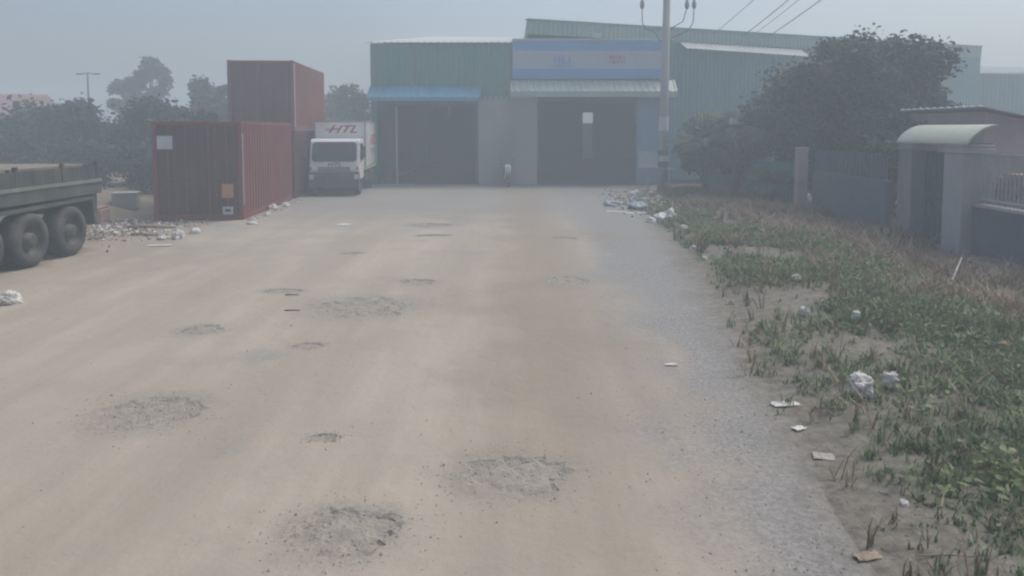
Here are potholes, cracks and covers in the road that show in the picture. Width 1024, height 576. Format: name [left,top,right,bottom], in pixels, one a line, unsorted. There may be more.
pothole [287,506,407,559]
pothole [309,433,338,441]
pothole [456,455,575,498]
pothole [93,396,208,432]
pothole [173,324,224,335]
pothole [304,296,408,318]
pothole [545,276,590,286]
